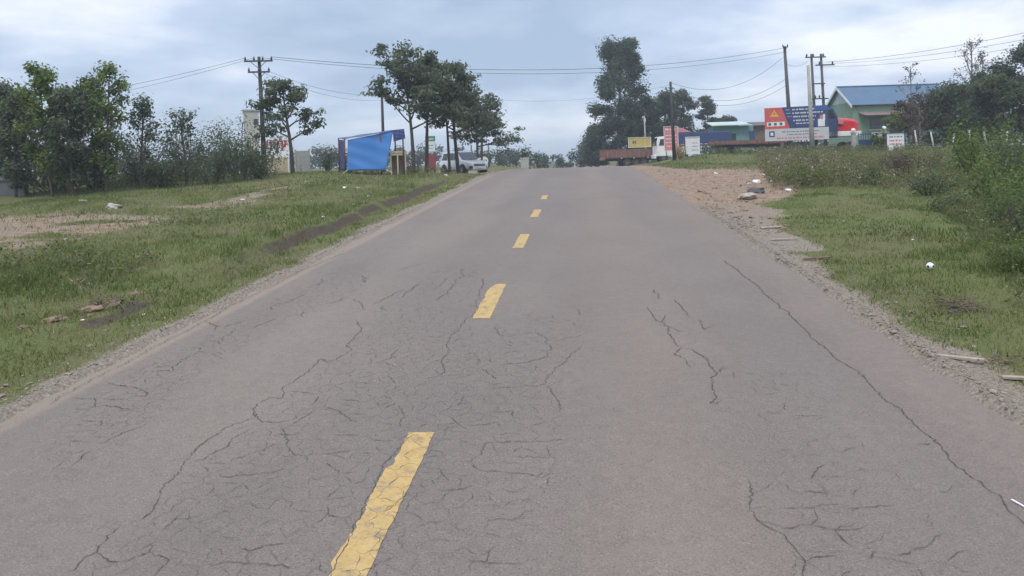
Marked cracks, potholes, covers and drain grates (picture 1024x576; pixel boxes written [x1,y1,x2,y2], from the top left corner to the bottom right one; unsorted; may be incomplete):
crack [647,289,735,403]
crack [748,434,970,576]
crack [361,314,580,576]
crack [67,264,484,576]
crack [725,262,1024,523]
